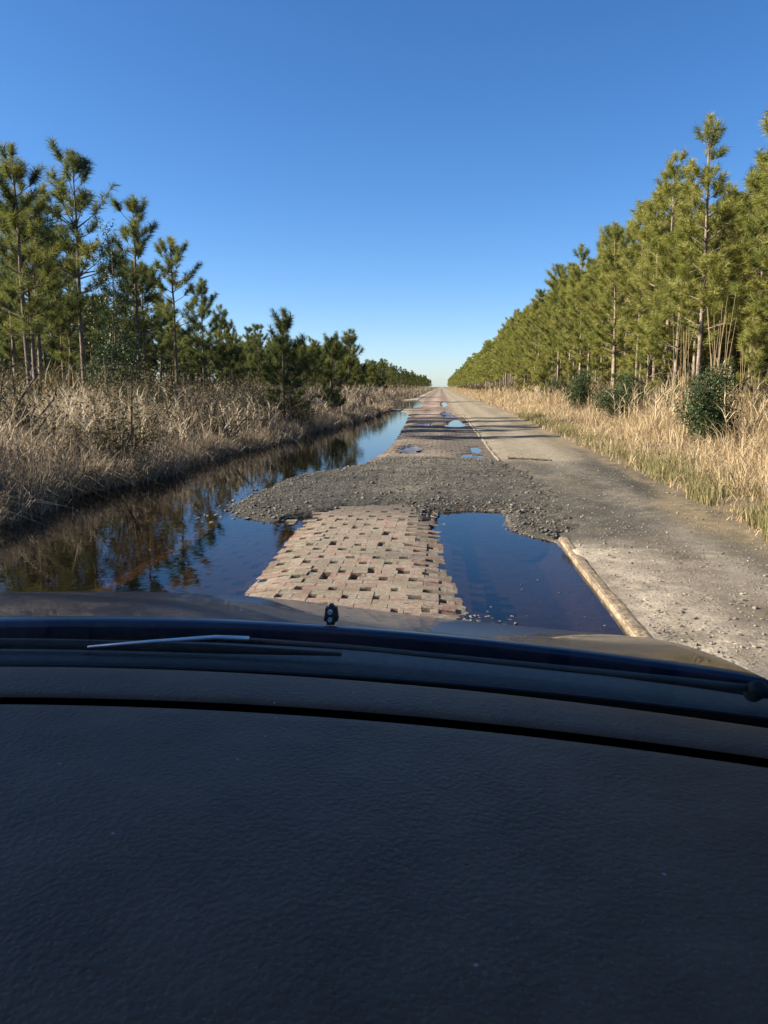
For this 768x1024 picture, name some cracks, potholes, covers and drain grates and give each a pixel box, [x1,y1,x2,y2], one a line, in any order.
pothole [397,445,424,454]
pothole [429,509,630,636]
pothole [458,447,485,458]
